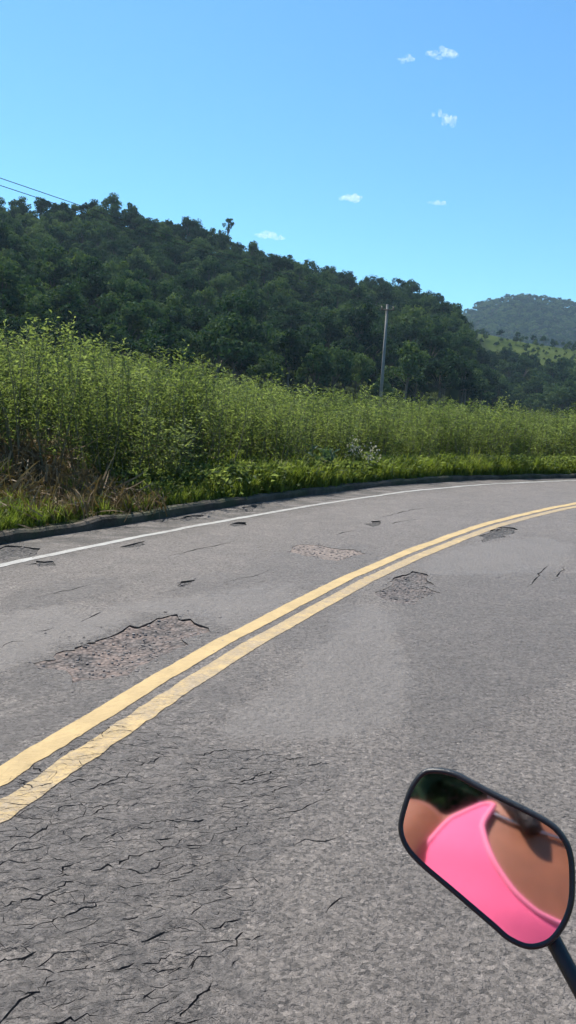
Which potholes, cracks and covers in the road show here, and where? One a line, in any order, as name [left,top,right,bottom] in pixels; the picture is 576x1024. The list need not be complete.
pothole [0,545,40,560]
pothole [288,543,371,561]
crack [0,696,334,1024]
pothole [361,568,447,605]
pothole [18,610,223,693]
pothole [467,525,518,542]
